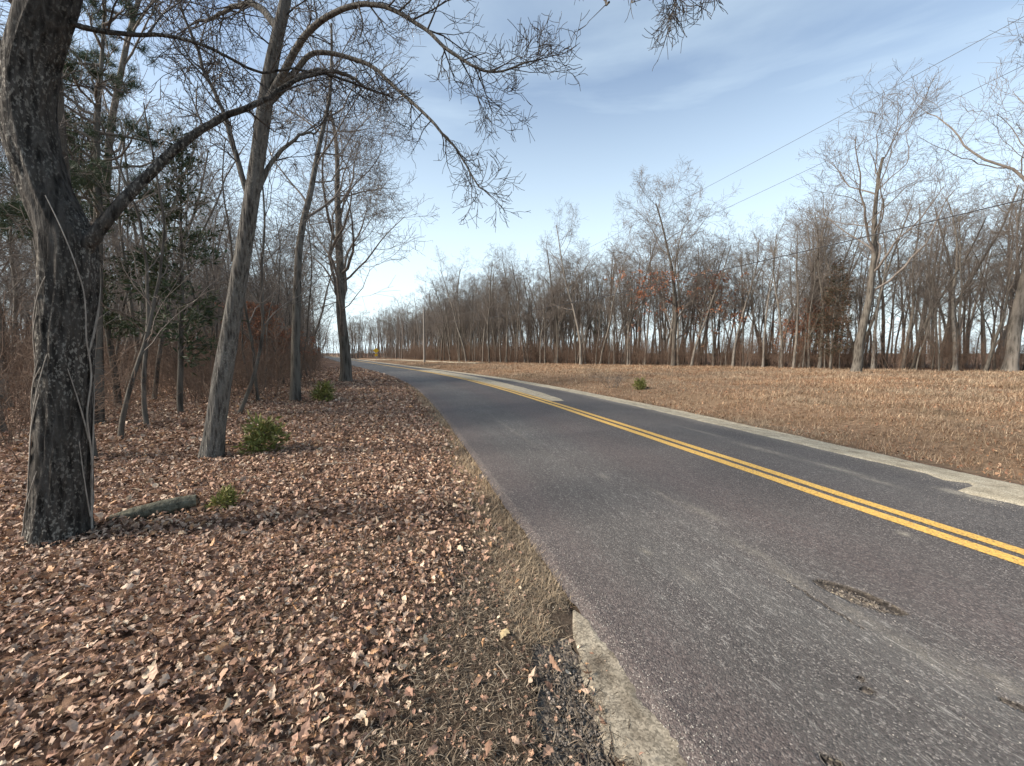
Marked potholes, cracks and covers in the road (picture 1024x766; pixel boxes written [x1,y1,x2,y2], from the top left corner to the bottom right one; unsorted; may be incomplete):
pothole [811,579,909,617]
pothole [858,686,876,696]
pothole [818,753,845,766]
pothole [997,697,1024,713]
